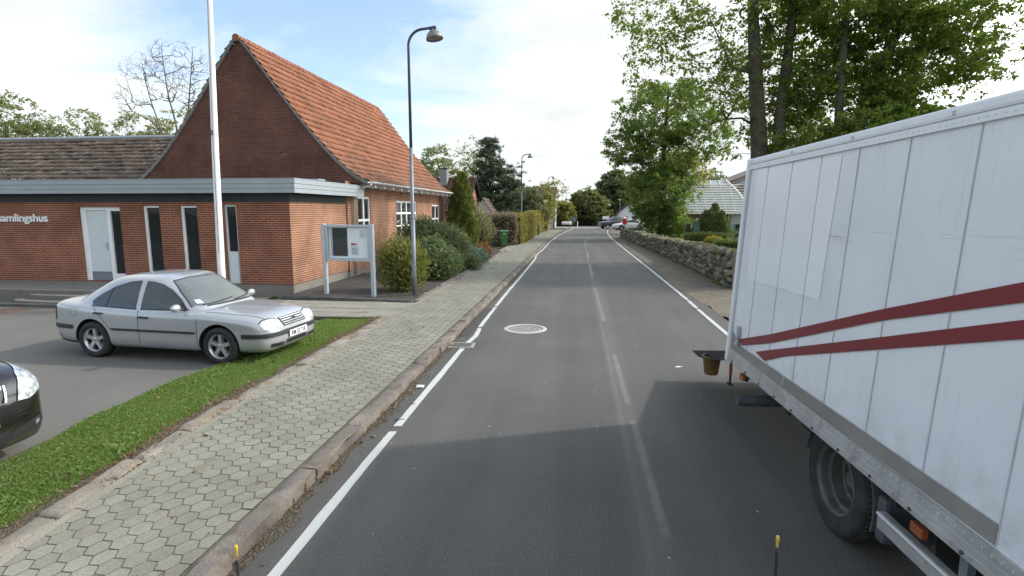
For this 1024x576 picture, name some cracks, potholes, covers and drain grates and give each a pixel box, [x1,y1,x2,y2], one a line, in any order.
manhole cover [504,324,547,334]
